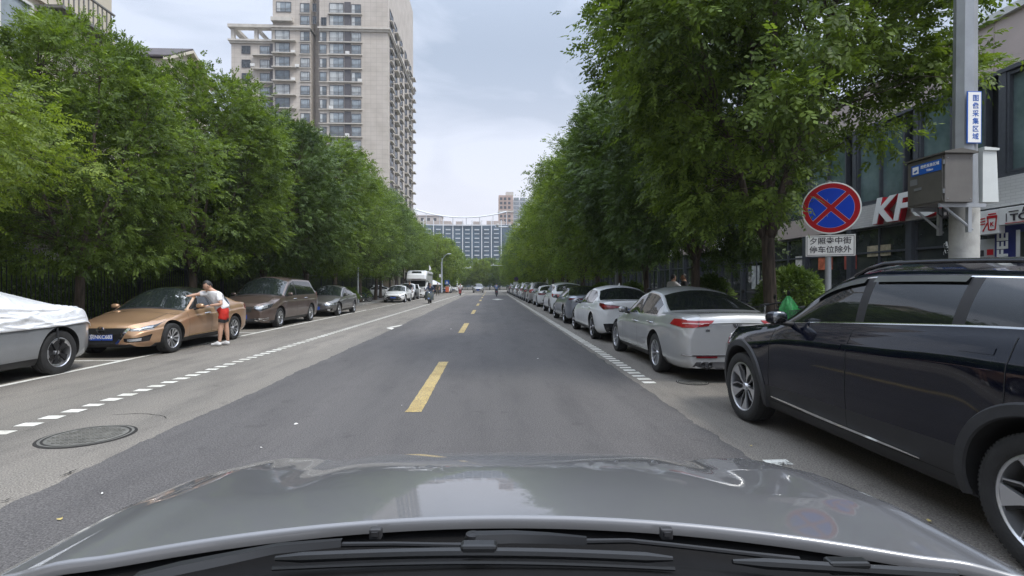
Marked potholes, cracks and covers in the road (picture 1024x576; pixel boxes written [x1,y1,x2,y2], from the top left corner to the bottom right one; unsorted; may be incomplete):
manhole cover [32,425,138,449]
